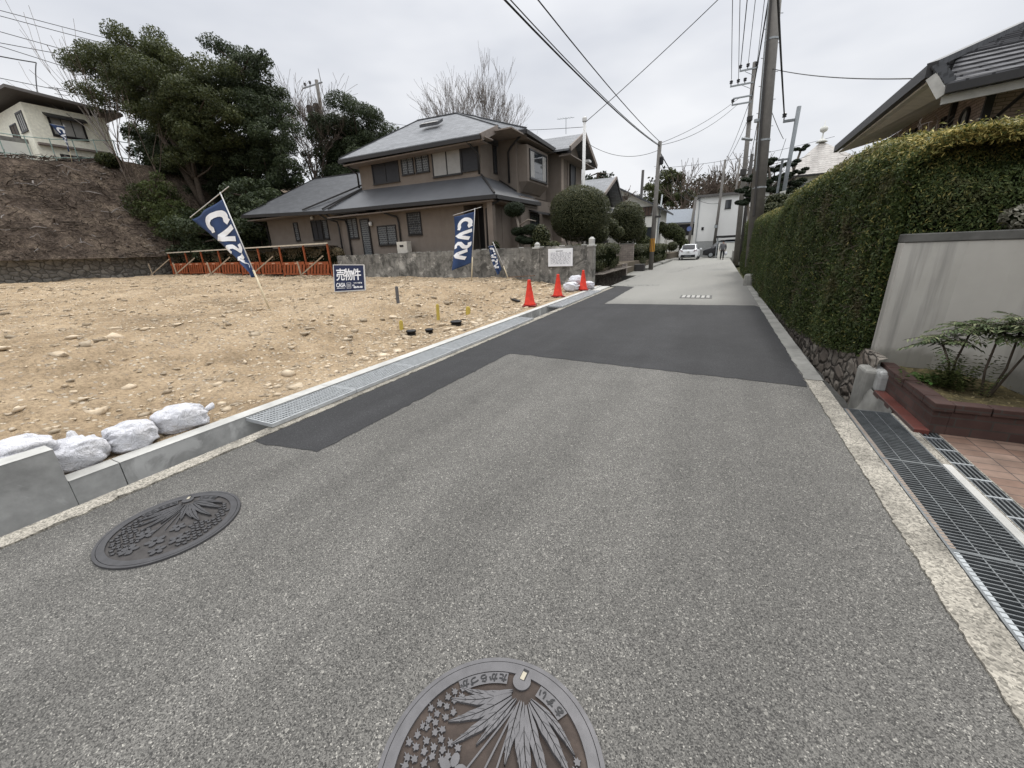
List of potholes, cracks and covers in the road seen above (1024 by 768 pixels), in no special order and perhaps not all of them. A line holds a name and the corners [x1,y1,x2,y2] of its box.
drain grate [332,364,415,392]
drain grate [246,386,357,427]
drain grate [471,325,514,338]
manhole cover [378,657,605,768]
drain grate [843,408,944,467]
drain grate [438,335,489,351]
manhole cover [91,491,241,570]
drain grate [498,317,534,327]
drain grate [392,347,457,368]
drain grate [880,457,1024,565]
